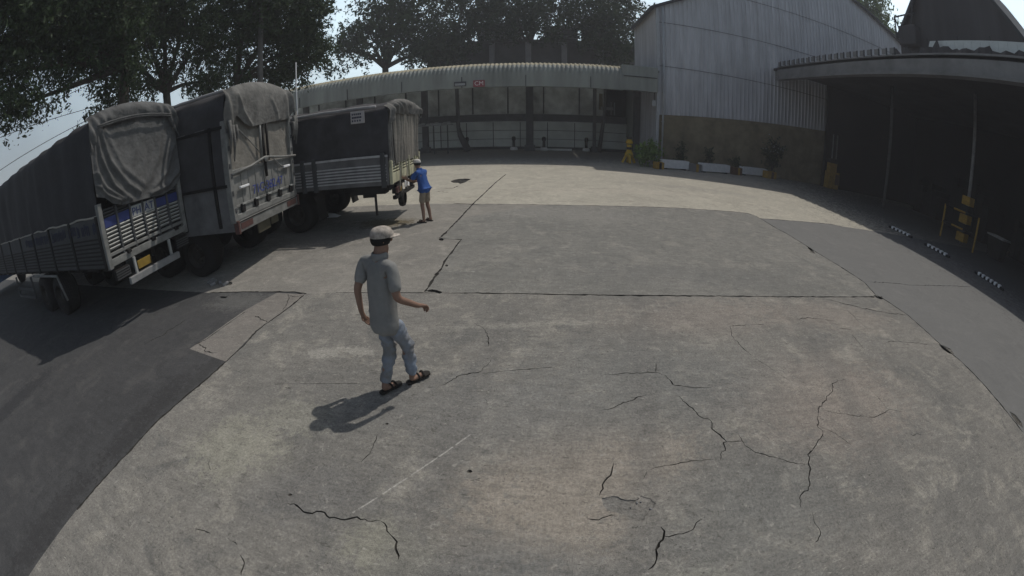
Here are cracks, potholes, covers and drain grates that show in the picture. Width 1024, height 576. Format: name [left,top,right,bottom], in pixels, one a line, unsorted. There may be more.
crack [648,519,702,570]
crack [599,463,614,496]
crack [276,495,400,560]
crack [611,368,902,542]
crack [443,324,491,385]
